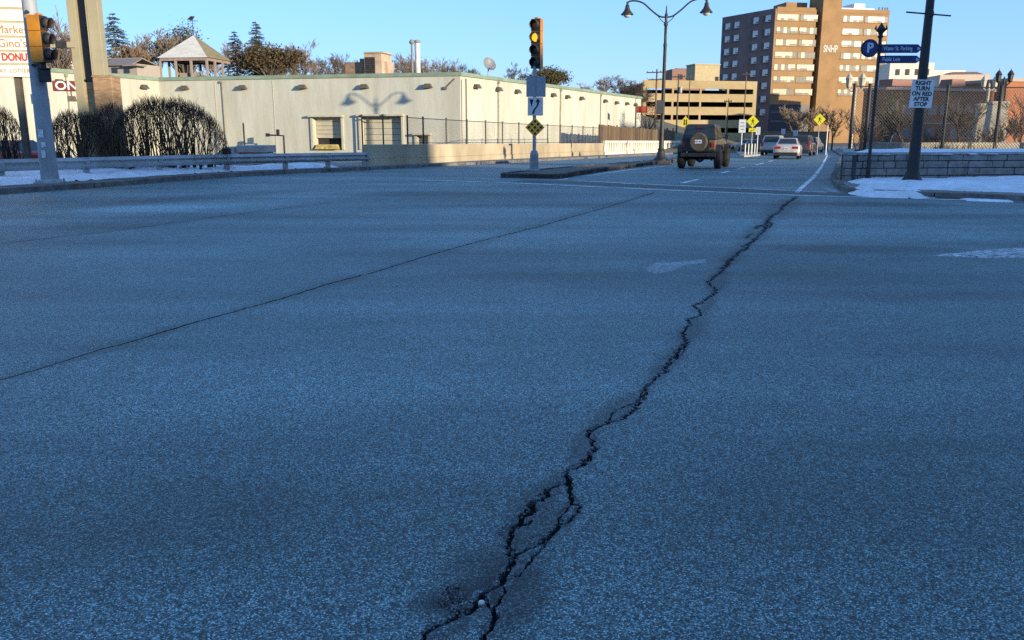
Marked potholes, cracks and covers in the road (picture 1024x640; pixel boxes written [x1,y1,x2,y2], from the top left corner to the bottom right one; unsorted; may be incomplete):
crack [421,197,799,640]
